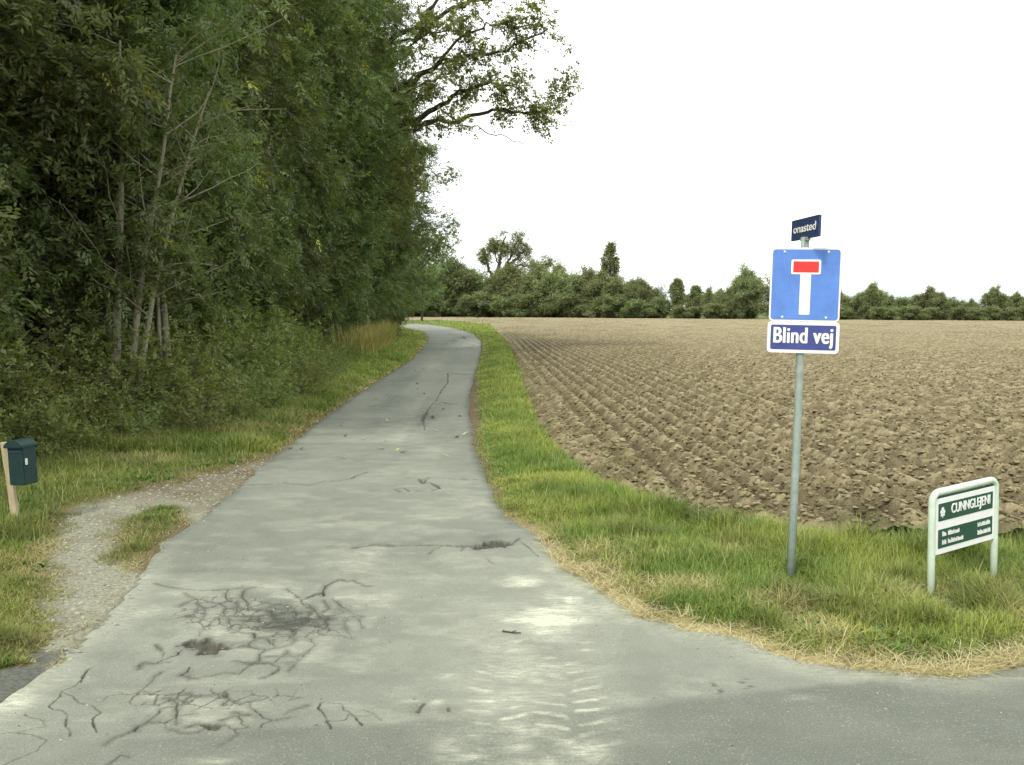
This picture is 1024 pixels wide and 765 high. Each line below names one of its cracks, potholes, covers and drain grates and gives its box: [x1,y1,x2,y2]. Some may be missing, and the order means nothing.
crack [0,579,373,765]
crack [423,372,474,431]
pothole [174,637,233,656]
crack [393,477,486,492]
crack [247,471,370,486]
crack [351,538,539,564]
